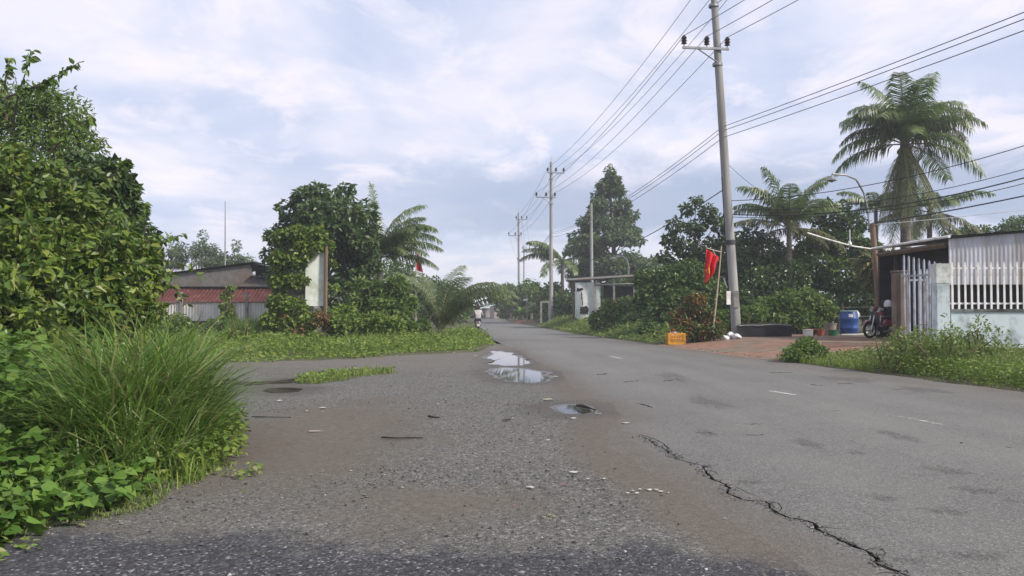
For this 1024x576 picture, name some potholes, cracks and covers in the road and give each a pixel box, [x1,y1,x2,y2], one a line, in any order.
crack [643,436,909,576]
pothole [482,350,533,366]
pothole [485,367,554,384]
pothole [550,404,598,414]
